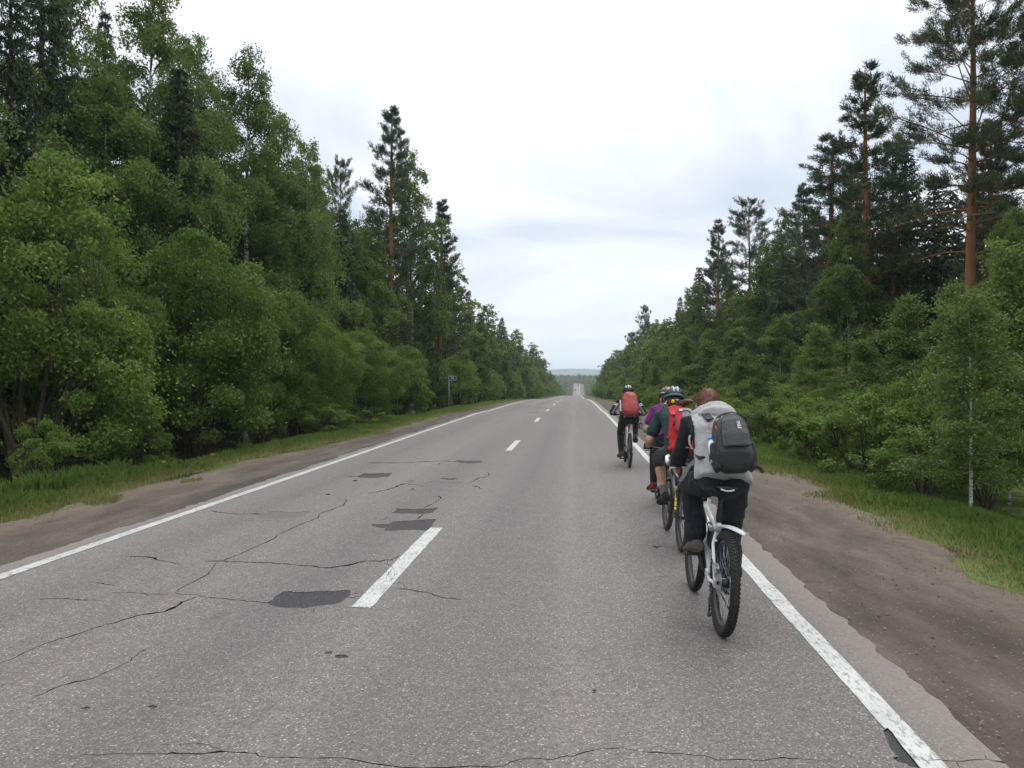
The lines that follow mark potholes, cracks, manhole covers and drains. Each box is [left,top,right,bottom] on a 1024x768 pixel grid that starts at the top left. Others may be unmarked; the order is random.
crack [2,499,400,663]
crack [37,649,145,696]
crack [82,743,812,768]
